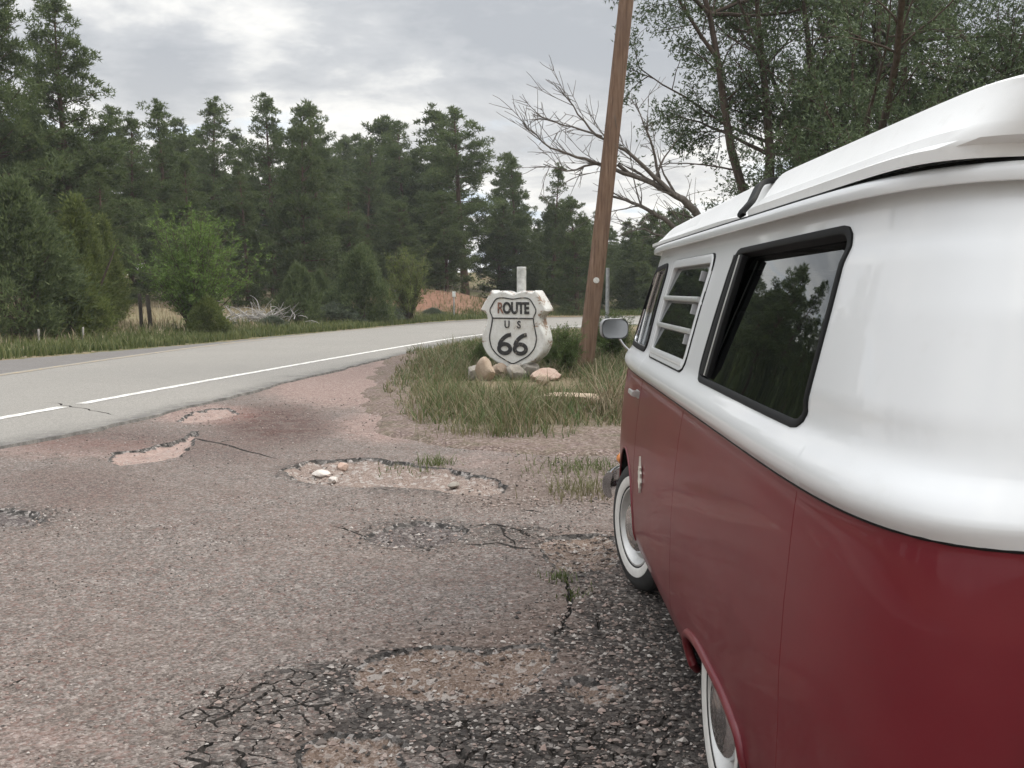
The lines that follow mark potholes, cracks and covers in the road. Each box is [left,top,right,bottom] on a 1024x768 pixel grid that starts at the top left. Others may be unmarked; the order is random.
pothole [0,508,46,527]
pothole [107,431,199,466]
pothole [279,457,509,496]
pothole [176,408,239,423]
crack [467,510,548,549]
crack [195,438,276,459]
crack [554,577,617,638]
